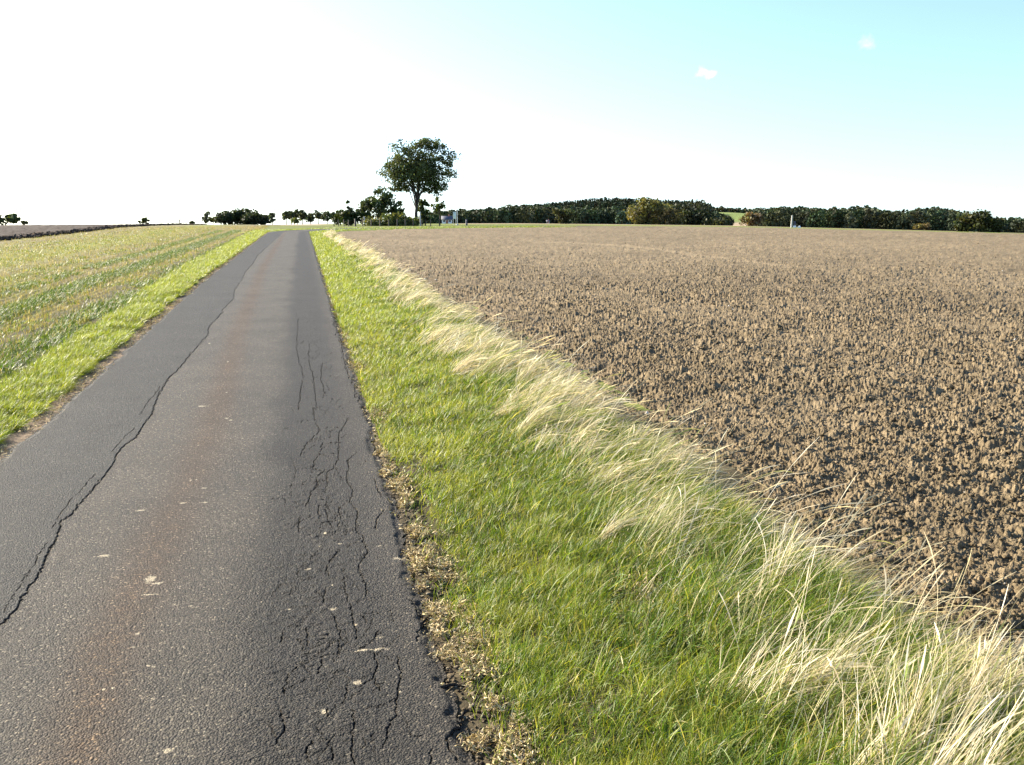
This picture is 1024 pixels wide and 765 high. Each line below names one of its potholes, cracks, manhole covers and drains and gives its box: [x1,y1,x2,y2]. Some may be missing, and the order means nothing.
crack [1,240,275,625]
crack [268,307,432,765]
